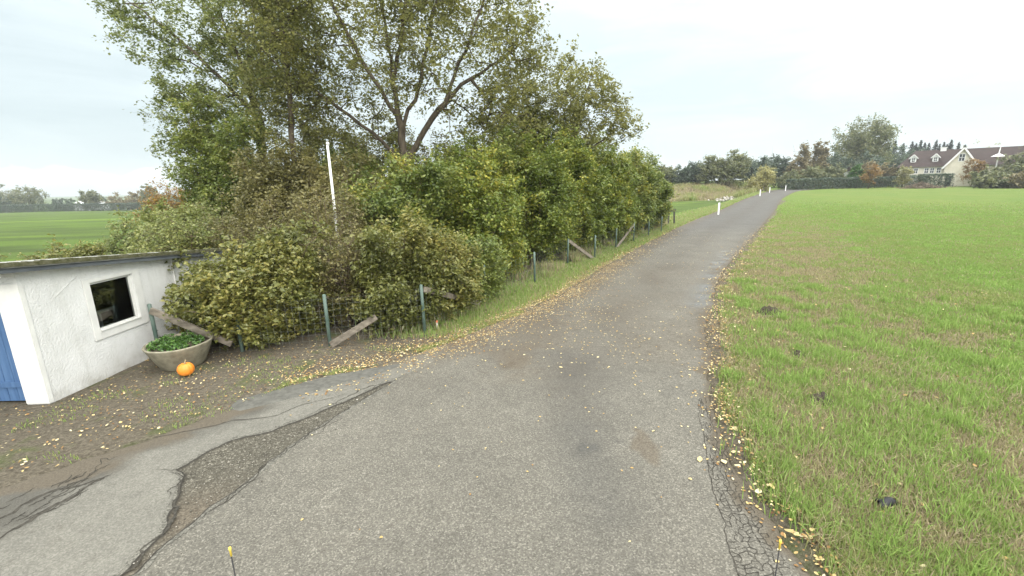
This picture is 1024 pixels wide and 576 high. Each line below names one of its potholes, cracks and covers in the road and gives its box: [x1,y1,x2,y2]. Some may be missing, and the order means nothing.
crack [698,399,789,576]
crack [0,458,200,576]
